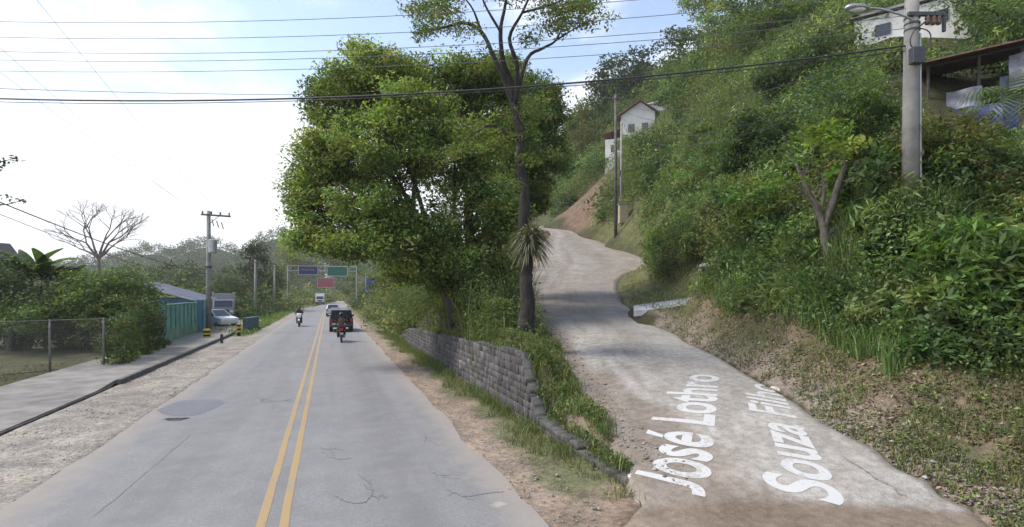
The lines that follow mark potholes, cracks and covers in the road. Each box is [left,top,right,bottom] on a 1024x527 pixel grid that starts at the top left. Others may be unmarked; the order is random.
crack [428,464,504,500]
crack [258,396,292,409]
crack [320,447,387,503]
